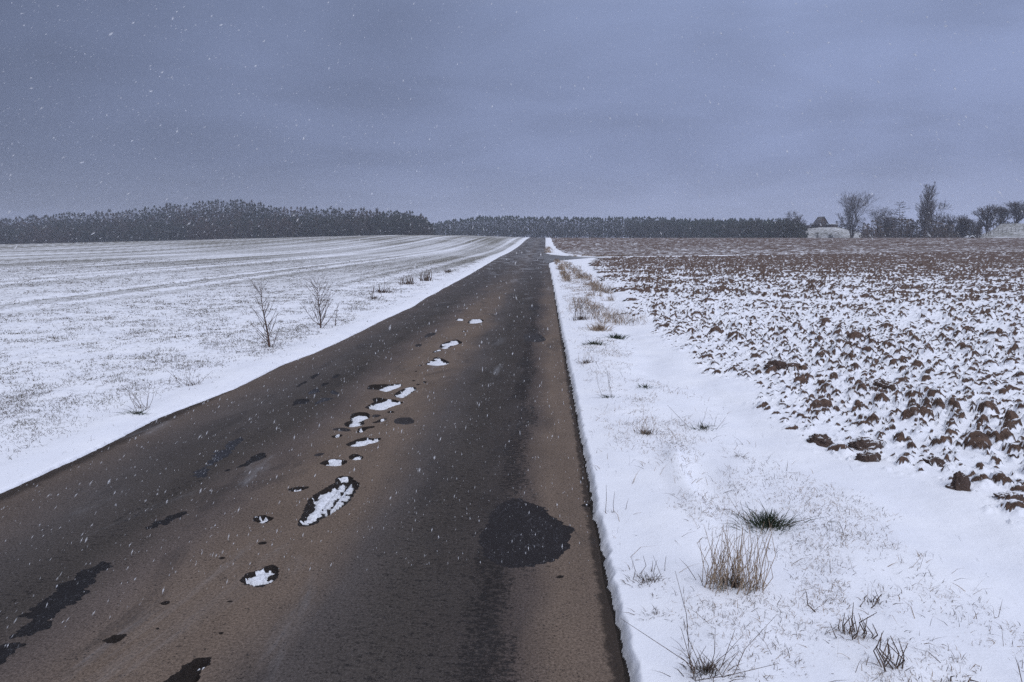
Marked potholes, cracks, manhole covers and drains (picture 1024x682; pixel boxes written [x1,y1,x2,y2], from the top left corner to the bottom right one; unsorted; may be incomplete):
pothole [426,357,449,366]
pothole [439,340,462,349]
pothole [365,397,403,410]
pothole [239,565,280,587]
pothole [344,412,370,427]
pothole [297,476,360,527]
pothole [367,384,402,392]
pothole [346,437,381,447]
